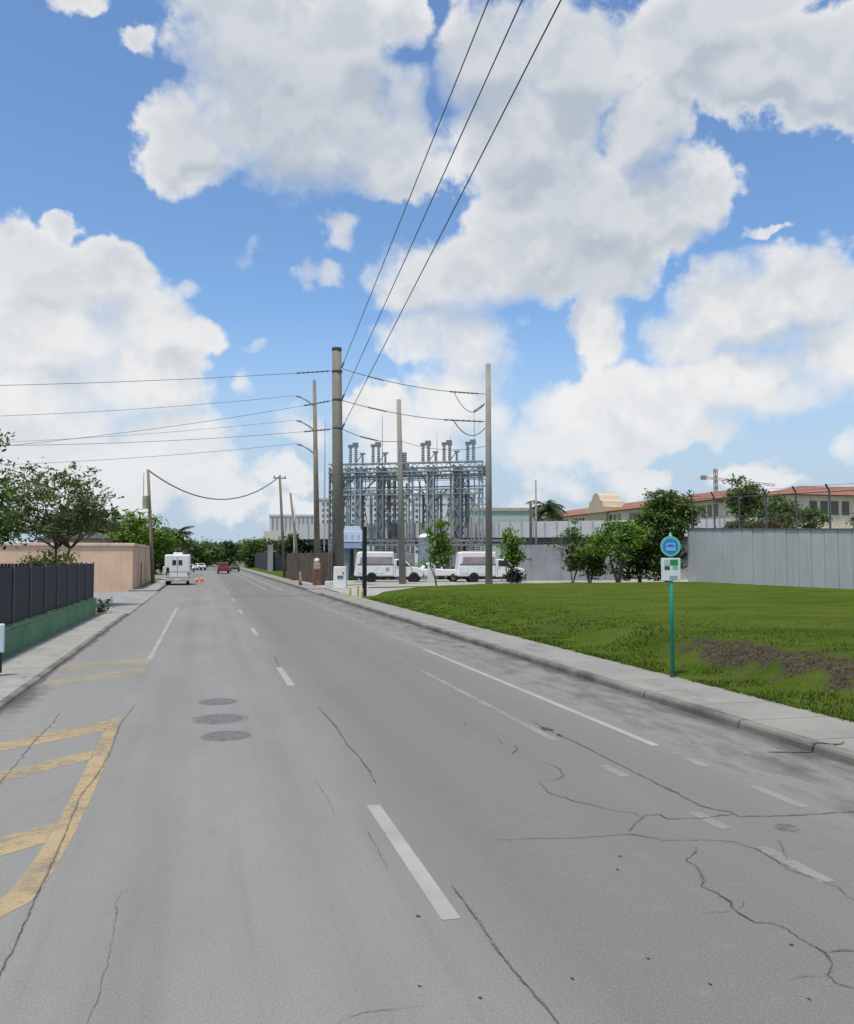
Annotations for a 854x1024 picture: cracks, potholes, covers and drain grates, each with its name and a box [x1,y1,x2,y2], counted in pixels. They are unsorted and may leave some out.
manhole cover [772,823,802,833]
manhole cover [189,714,249,725]
crack [502,722,853,987]
manhole cover [200,731,252,741]
crack [88,890,123,1018]
